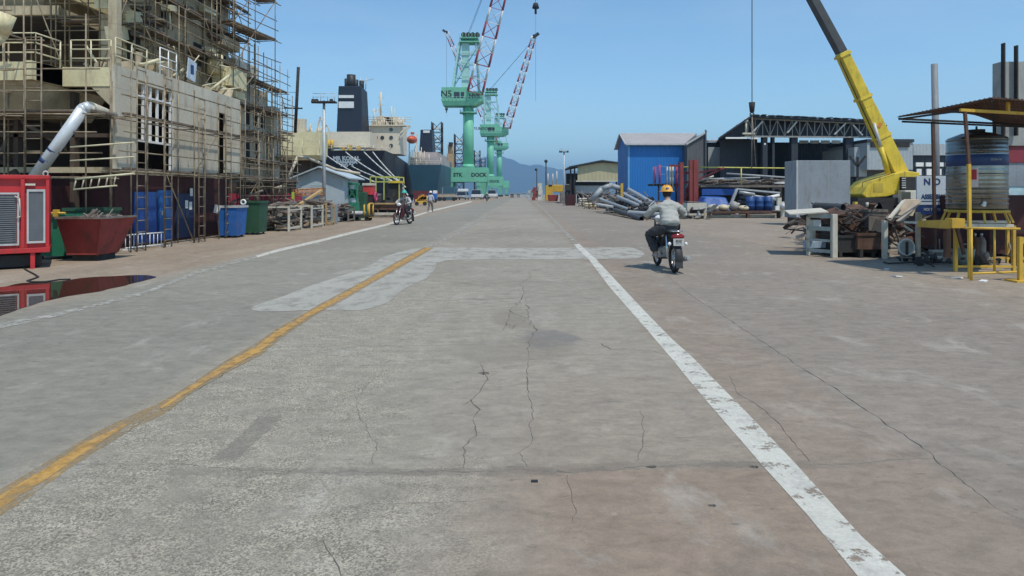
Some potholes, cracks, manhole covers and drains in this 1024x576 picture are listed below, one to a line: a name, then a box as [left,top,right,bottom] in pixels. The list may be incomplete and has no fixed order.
crack [698,356,810,462]
crack [446,276,538,464]
